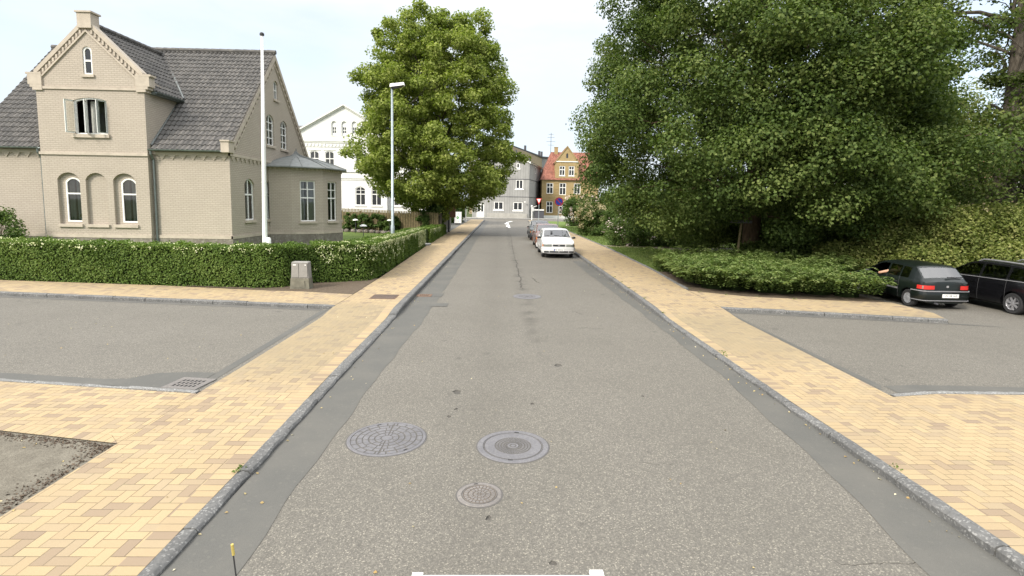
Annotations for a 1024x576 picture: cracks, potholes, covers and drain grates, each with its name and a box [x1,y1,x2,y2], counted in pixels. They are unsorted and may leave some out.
crack [828,557,915,566]
manhole cover [455,482,503,508]
manhole cover [345,422,427,457]
manhole cover [476,430,550,464]
